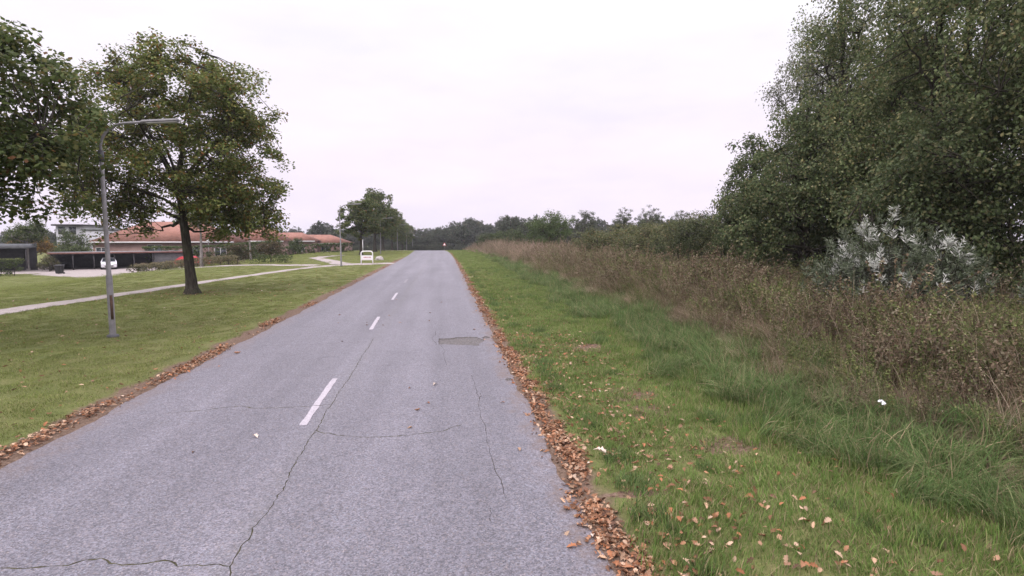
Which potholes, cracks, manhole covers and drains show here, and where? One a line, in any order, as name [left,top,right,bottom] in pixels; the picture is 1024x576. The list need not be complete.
crack [471,375,506,521]
crack [7,340,459,576]
